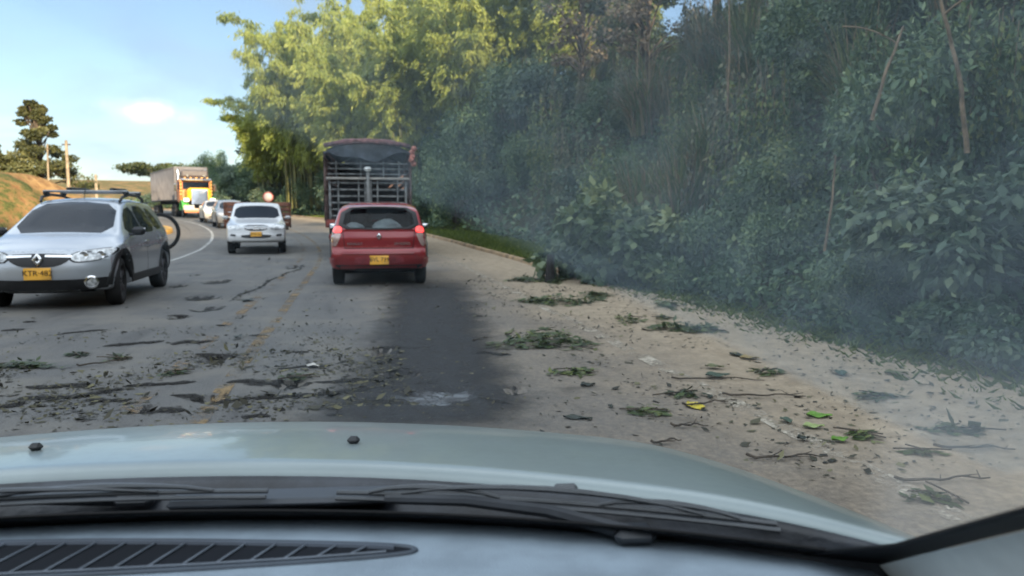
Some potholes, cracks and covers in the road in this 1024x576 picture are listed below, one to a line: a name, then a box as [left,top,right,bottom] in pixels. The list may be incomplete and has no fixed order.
pothole [395,388,476,406]
